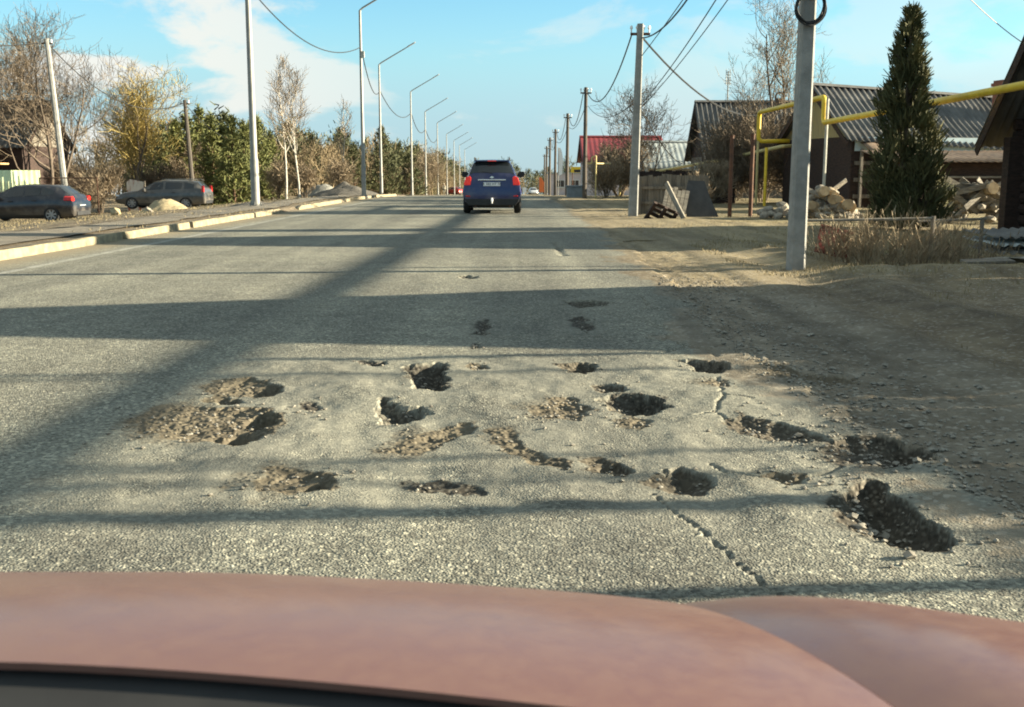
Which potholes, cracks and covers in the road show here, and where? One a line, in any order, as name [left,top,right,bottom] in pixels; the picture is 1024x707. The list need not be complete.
pothole [199,377,283,398]
pothole [485,426,570,469]
pothole [402,362,450,391]
pothole [554,362,597,374]
pothole [399,480,486,496]
pothole [252,466,335,495]
crack [693,376,757,423]
pothole [674,359,730,374]
pothole [473,320,490,335]
pothole [821,435,940,469]
pothole [826,479,956,552]
pothole [595,393,673,417]
